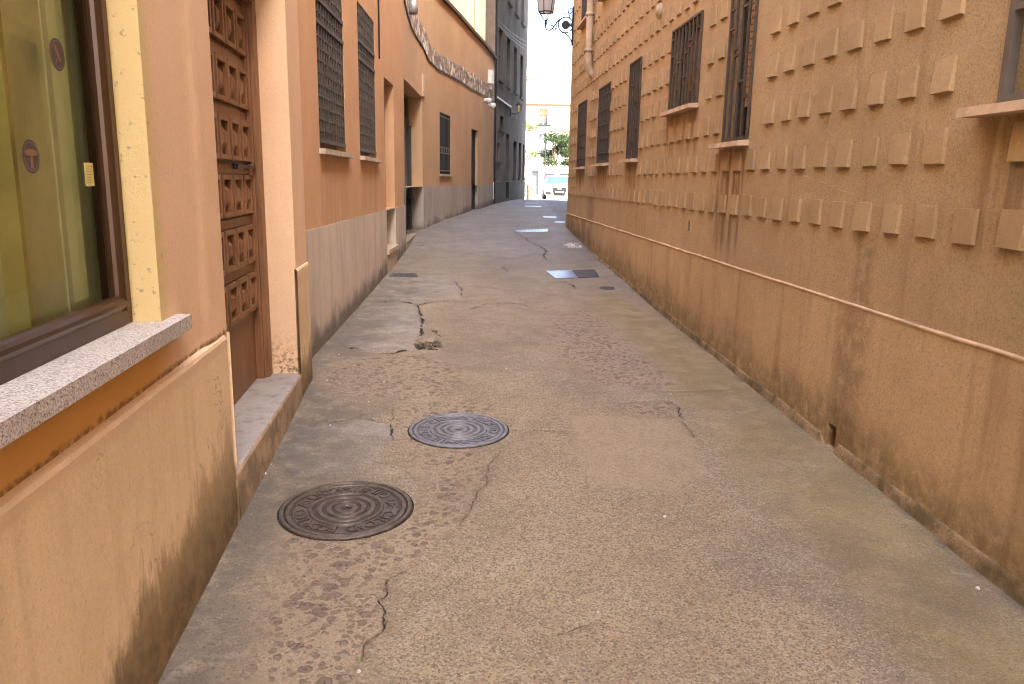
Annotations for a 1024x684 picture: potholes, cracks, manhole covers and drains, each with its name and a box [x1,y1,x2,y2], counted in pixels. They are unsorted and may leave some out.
pothole [414,340,442,350]
crack [613,386,753,439]
crack [350,560,424,667]
crack [315,406,400,442]
manhole cover [277,481,414,541]
utility cover [572,269,599,278]
crack [340,281,580,355]
crack [449,451,504,531]
manhole cover [407,413,509,449]
crack [500,233,554,272]
